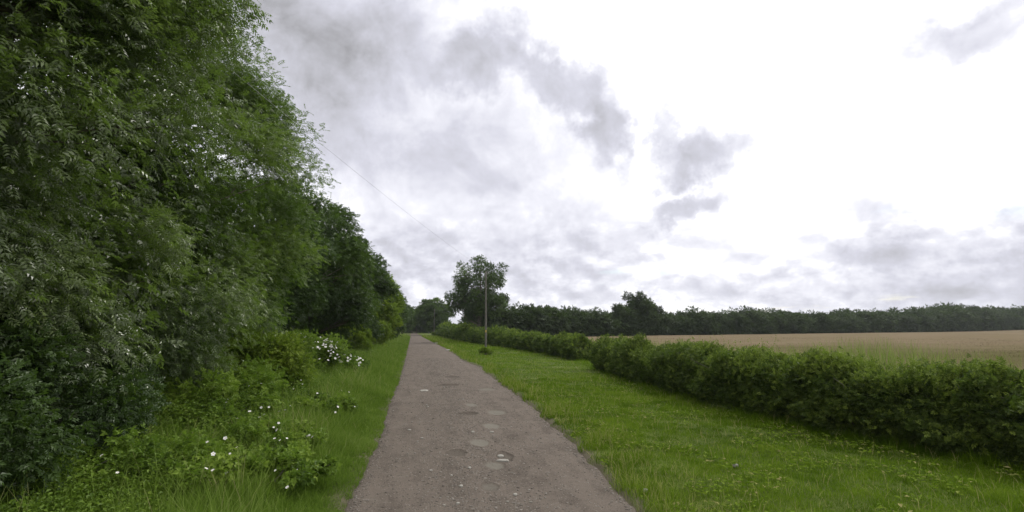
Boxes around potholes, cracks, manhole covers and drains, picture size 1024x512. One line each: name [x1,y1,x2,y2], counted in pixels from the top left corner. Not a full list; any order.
pothole [475,481,505,493]
pothole [465,438,494,448]
pothole [441,448,471,458]
pothole [492,449,518,462]
pothole [478,460,510,471]
